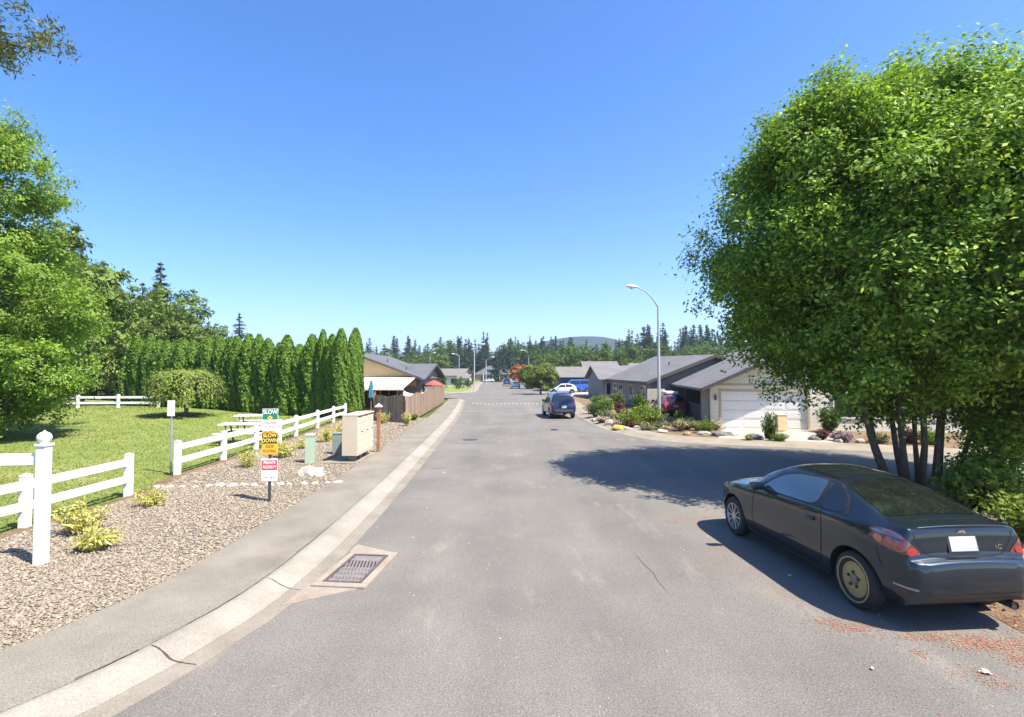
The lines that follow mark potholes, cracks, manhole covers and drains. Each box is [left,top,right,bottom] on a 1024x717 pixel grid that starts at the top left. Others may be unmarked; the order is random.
crack [152,645,194,664]
drain grate [282,544,398,606]
